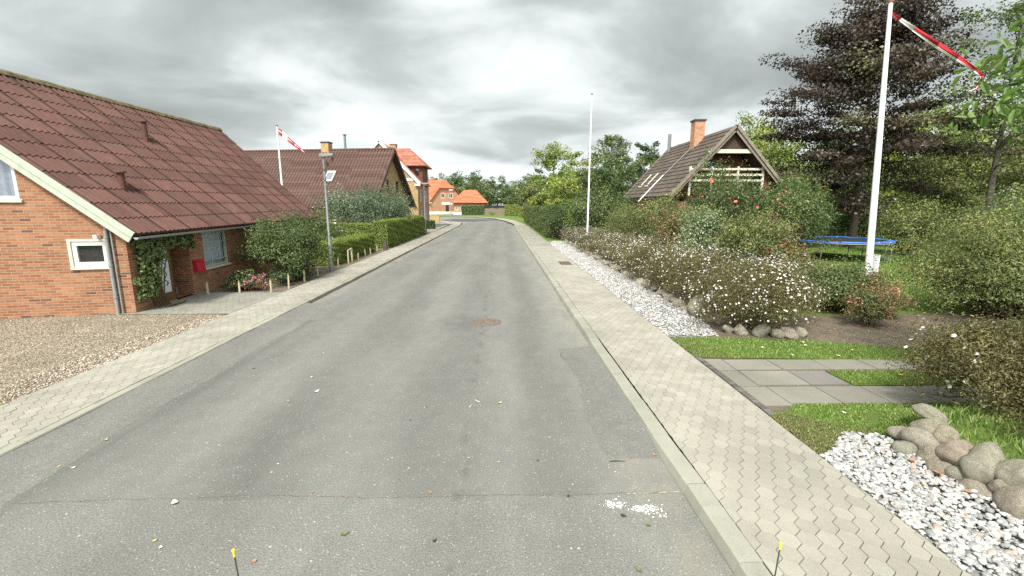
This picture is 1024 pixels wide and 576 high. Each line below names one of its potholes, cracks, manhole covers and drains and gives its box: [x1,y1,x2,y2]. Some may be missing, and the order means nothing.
manhole cover [471,318,501,326]
